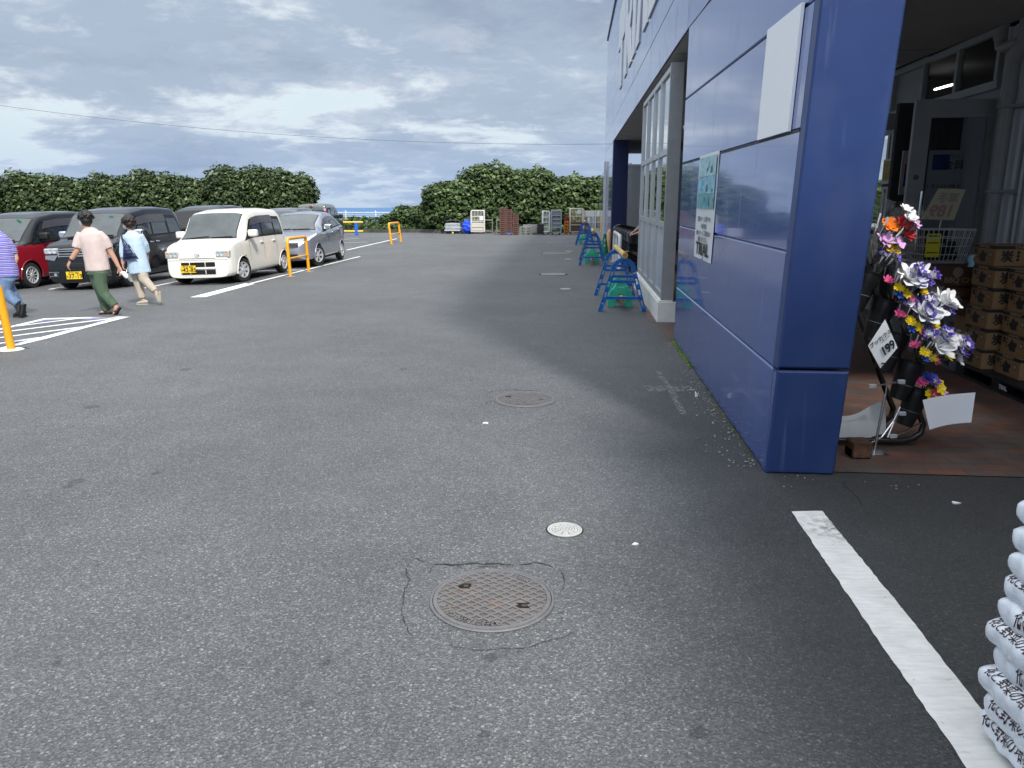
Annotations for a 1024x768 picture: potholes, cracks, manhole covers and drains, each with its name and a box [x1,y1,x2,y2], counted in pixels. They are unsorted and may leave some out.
crack [401,557,578,650]
manhole cover [429,569,555,633]
manhole cover [494,391,556,408]
utility cover [546,522,584,538]
